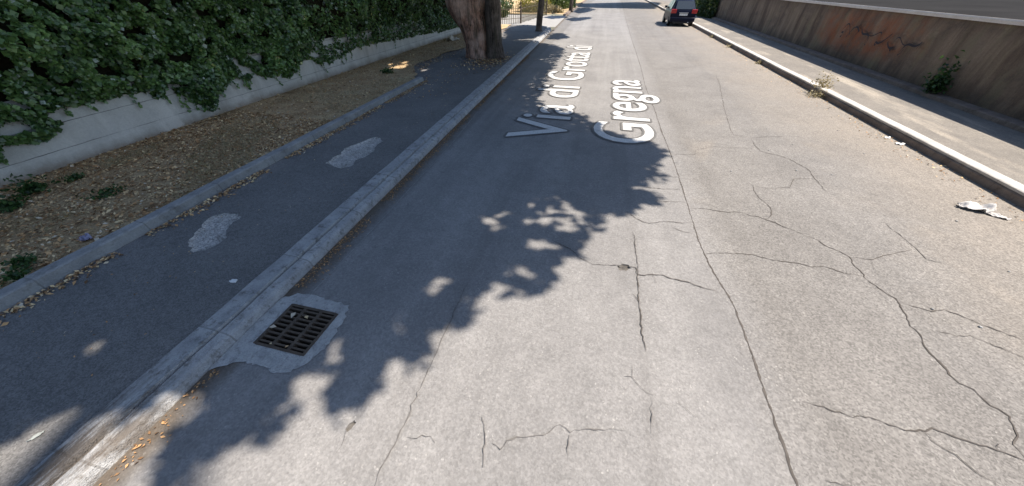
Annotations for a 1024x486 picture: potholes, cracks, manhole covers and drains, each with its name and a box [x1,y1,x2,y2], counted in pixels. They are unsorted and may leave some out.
crack [375,287,466,485]
crack [705,136,1024,481]
drain grate [206,293,349,373]
crack [553,215,716,348]
crack [481,416,626,465]
